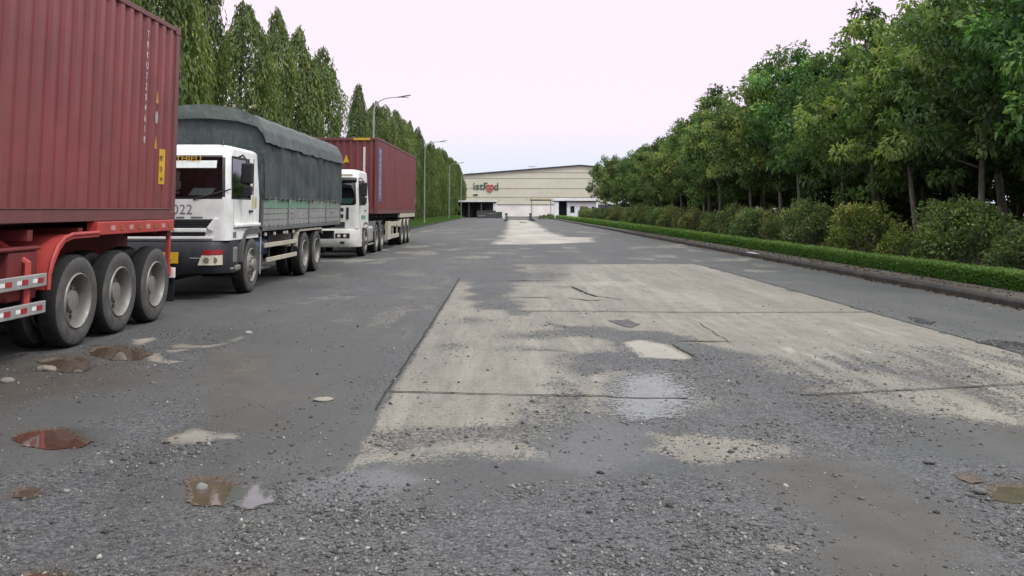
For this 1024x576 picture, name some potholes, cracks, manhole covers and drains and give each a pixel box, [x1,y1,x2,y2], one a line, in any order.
pothole [223,481,281,510]
pothole [183,476,243,507]
pothole [12,427,93,450]
crack [673,320,728,358]
pothole [11,485,46,499]
pothole [84,345,152,361]
pothole [36,356,93,373]
crack [704,265,1024,354]
pothole [597,369,707,423]
crack [508,280,620,300]
